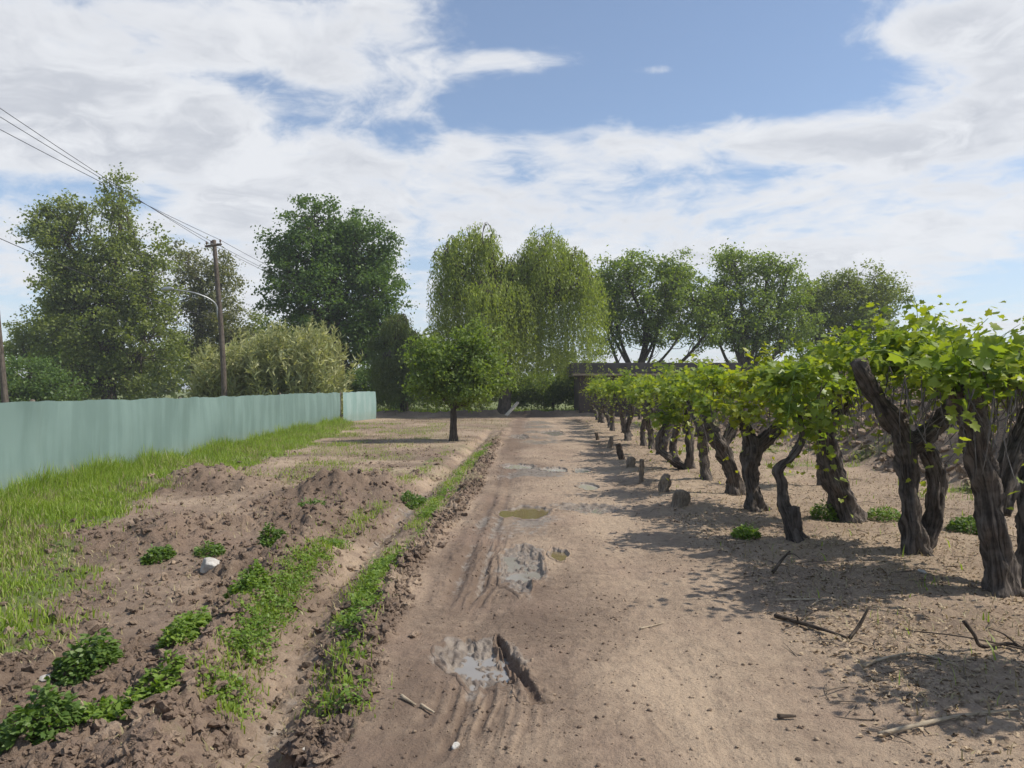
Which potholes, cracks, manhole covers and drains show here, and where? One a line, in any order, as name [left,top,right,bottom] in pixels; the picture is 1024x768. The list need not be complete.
pothole [430,634,536,696]
pothole [547,546,571,563]
pothole [496,540,550,599]
pothole [574,482,601,491]
pothole [494,503,557,521]
